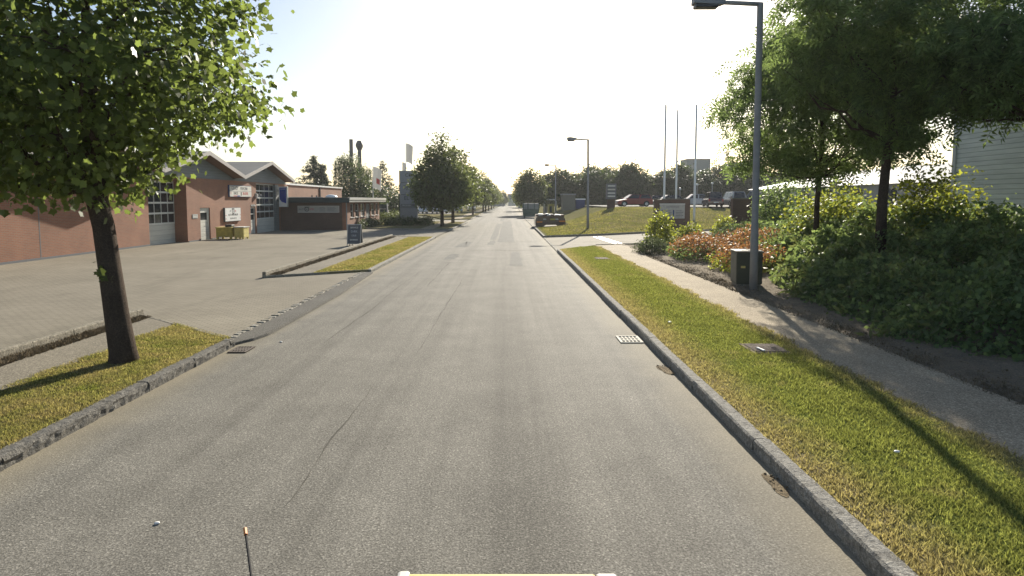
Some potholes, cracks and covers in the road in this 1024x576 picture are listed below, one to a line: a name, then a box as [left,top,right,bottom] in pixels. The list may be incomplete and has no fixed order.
crack [288,386,373,503]
crack [327,262,461,355]
